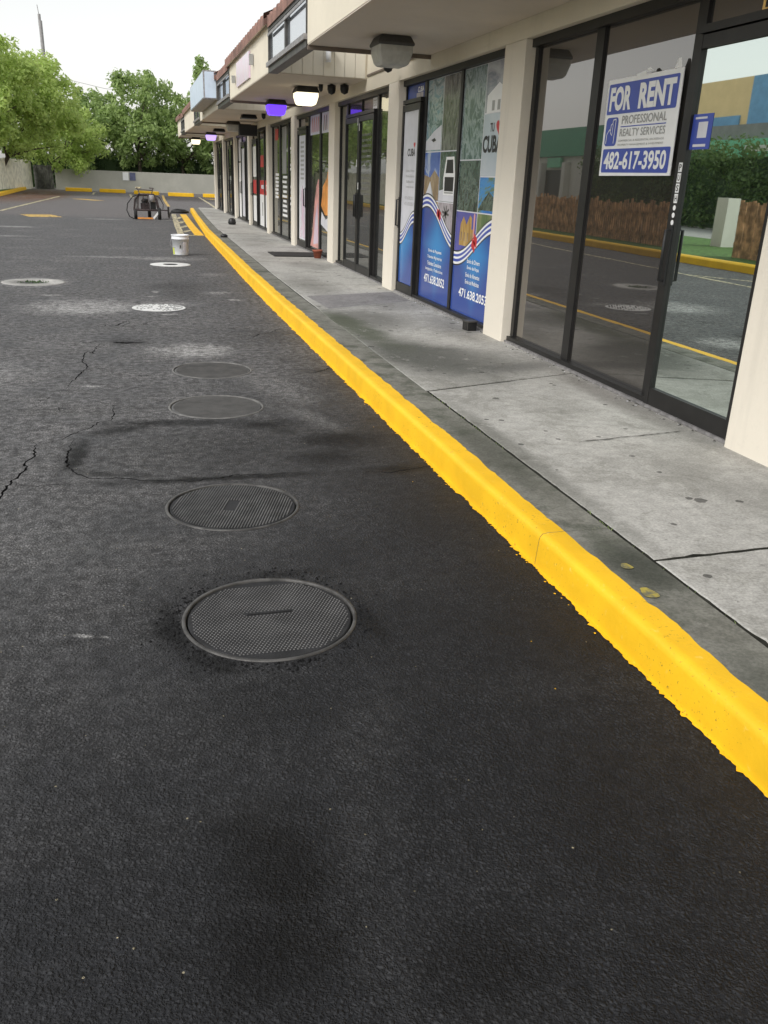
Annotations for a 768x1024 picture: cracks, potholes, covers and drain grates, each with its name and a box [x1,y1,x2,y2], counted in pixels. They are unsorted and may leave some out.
manhole cover [172,362,252,379]
manhole cover [130,304,187,312]
crack [40,321,149,412]
manhole cover [182,578,357,662]
manhole cover [1,278,66,286]
crack [0,404,312,499]
manhole cover [165,483,299,531]
manhole cover [168,395,264,419]
